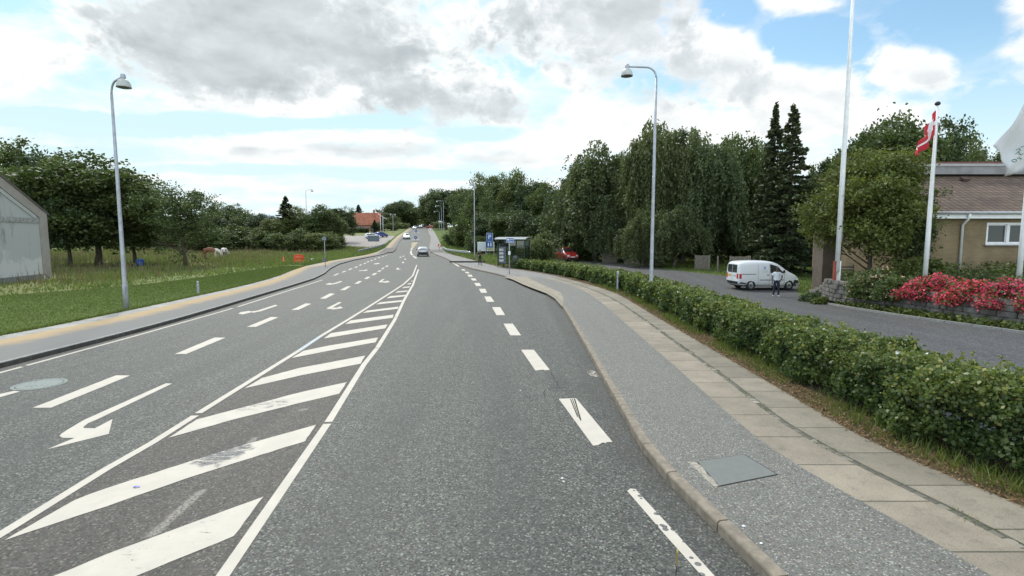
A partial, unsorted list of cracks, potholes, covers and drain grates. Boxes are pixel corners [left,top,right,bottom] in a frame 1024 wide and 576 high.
manhole cover [10,378,68,391]
manhole cover [687,454,778,487]
